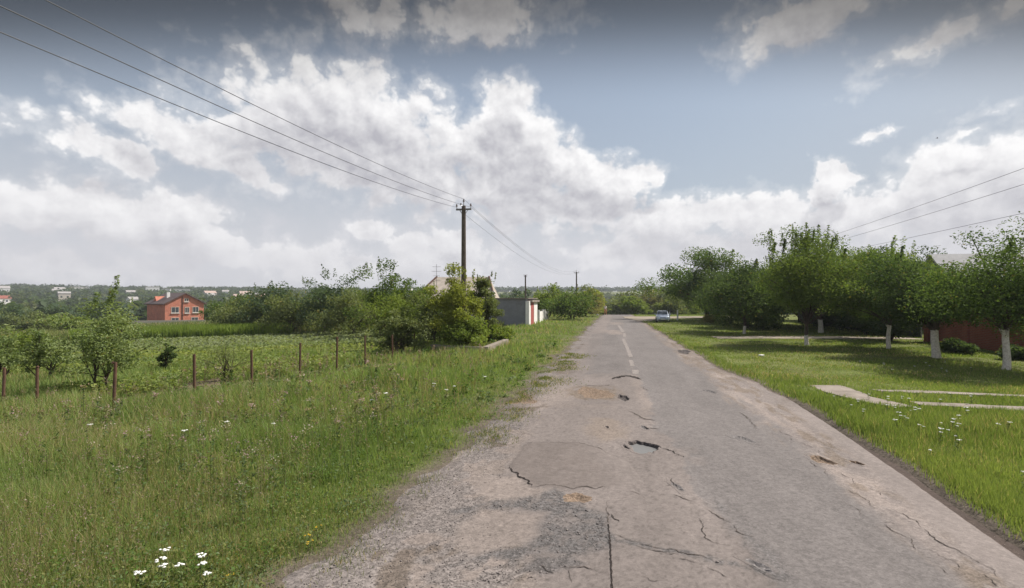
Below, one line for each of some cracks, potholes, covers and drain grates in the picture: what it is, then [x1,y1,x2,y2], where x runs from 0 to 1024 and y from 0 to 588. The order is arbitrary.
pothole [624,439,663,455]
crack [587,375,647,390]
pothole [804,454,844,468]
crack [779,430,996,585]
